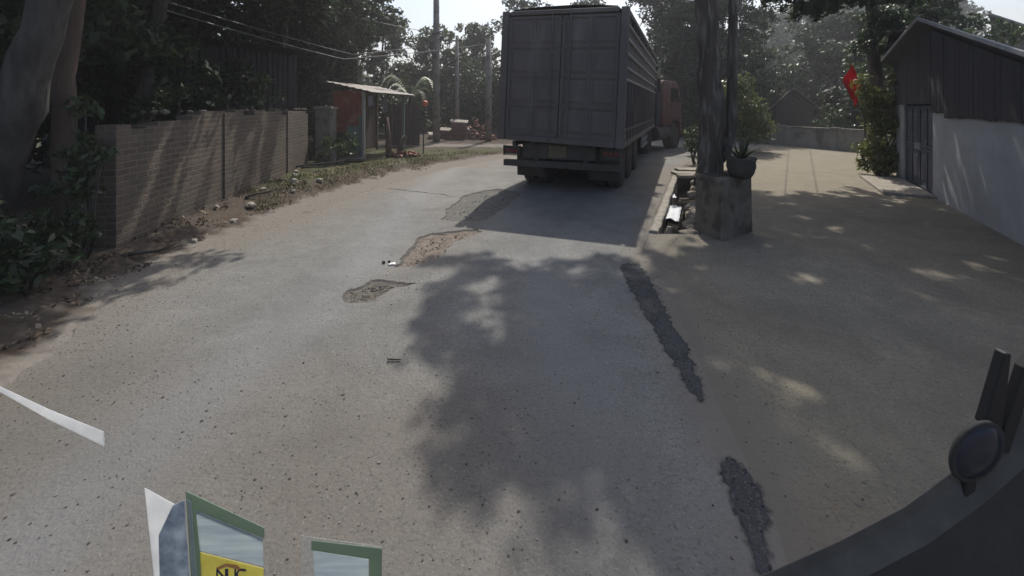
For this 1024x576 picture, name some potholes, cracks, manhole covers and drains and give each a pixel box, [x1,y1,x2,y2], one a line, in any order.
pothole [393,229,482,268]
pothole [440,189,521,221]
pothole [342,279,415,303]
